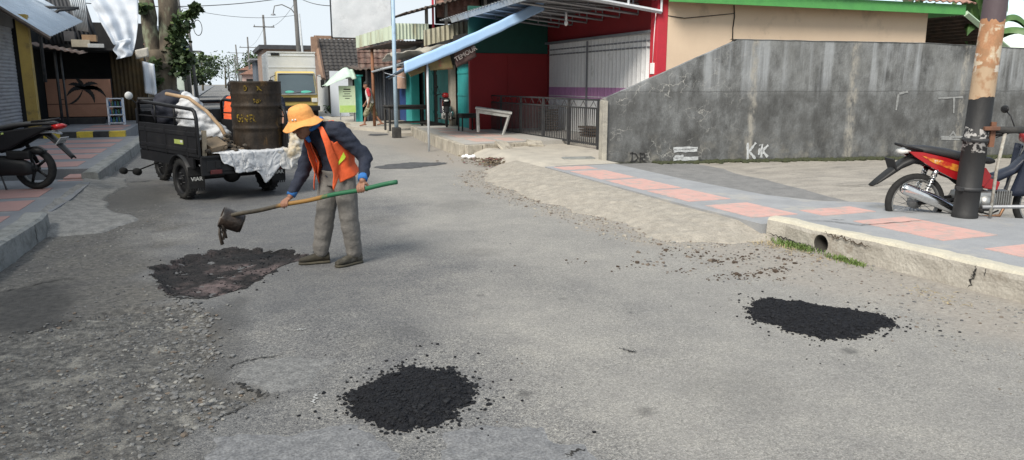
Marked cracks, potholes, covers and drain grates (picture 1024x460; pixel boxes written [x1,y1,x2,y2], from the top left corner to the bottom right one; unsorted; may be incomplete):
crack [220,355,275,417]
